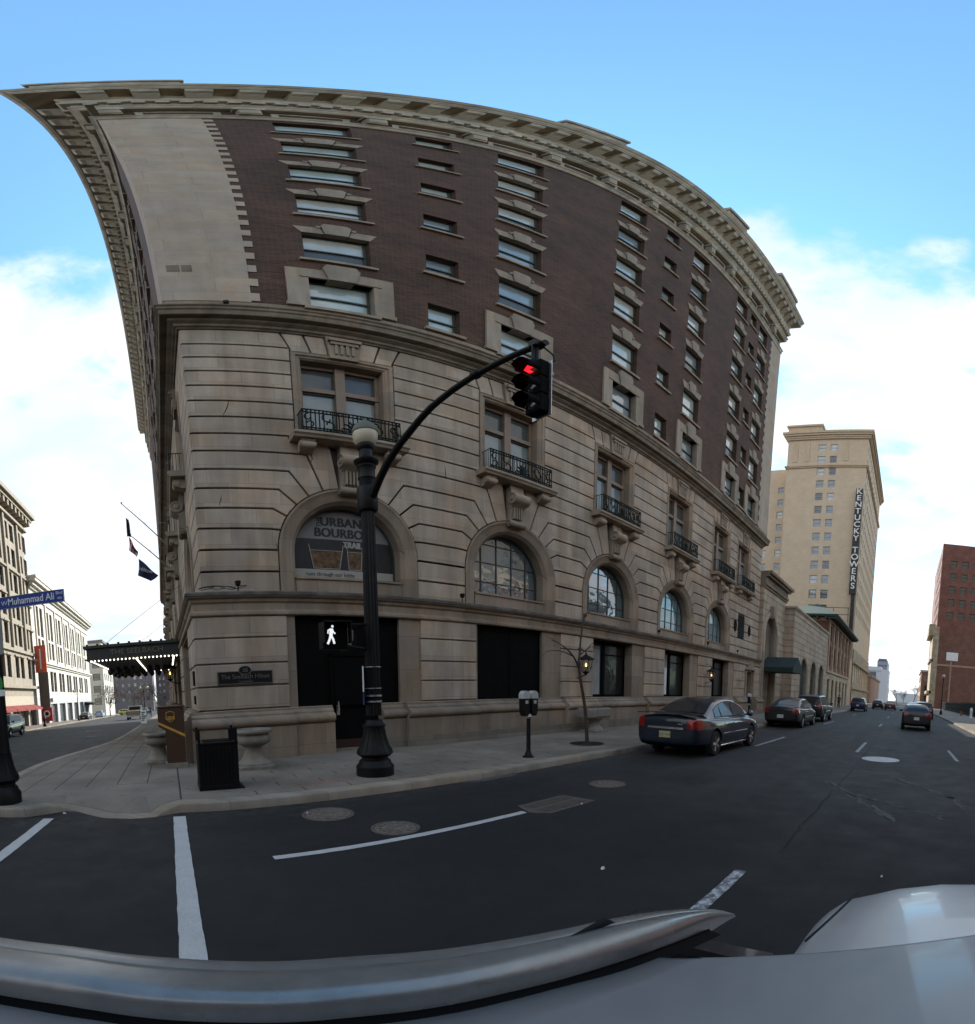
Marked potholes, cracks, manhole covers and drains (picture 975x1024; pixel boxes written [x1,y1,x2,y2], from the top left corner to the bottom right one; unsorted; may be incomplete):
manhole cover [589,780,626,788]
manhole cover [371,821,420,836]
utility cover [518,795,595,813]
crack [824,776,967,822]
manhole cover [302,807,354,822]
